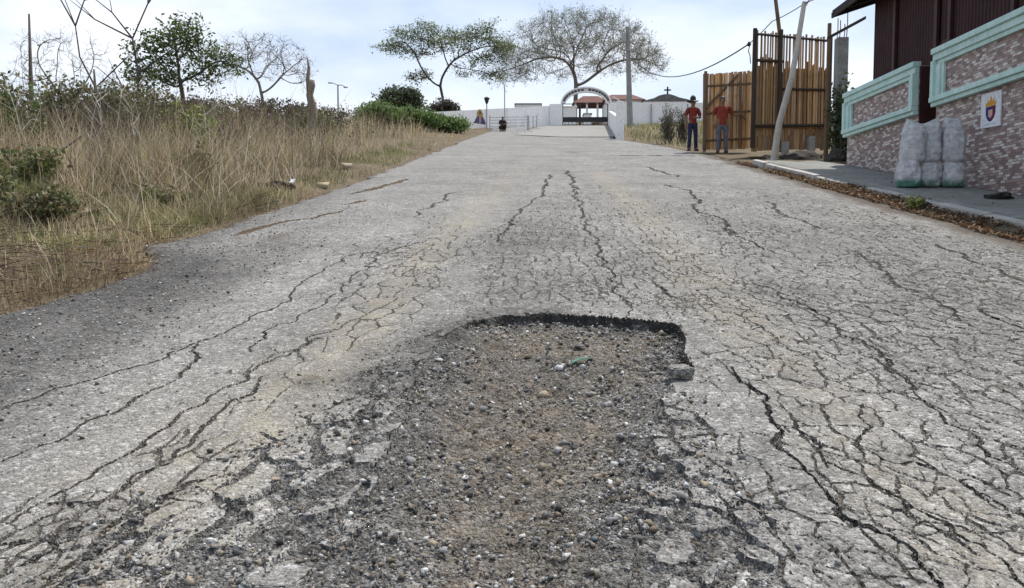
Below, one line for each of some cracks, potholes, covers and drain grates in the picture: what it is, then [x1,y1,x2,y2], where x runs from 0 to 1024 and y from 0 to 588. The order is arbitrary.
pothole [4,313,834,588]
crack [445,170,716,319]
crack [232,178,455,236]
crack [0,213,486,588]
crack [609,155,775,253]
crack [654,188,1024,588]
